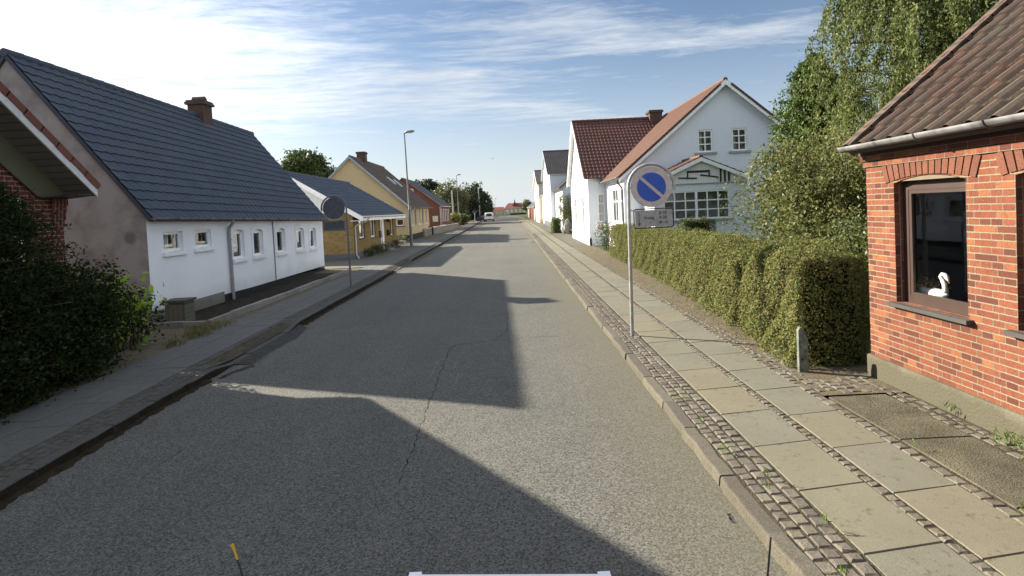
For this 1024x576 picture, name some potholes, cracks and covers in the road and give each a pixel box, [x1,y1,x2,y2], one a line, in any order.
crack [399,313,554,484]
